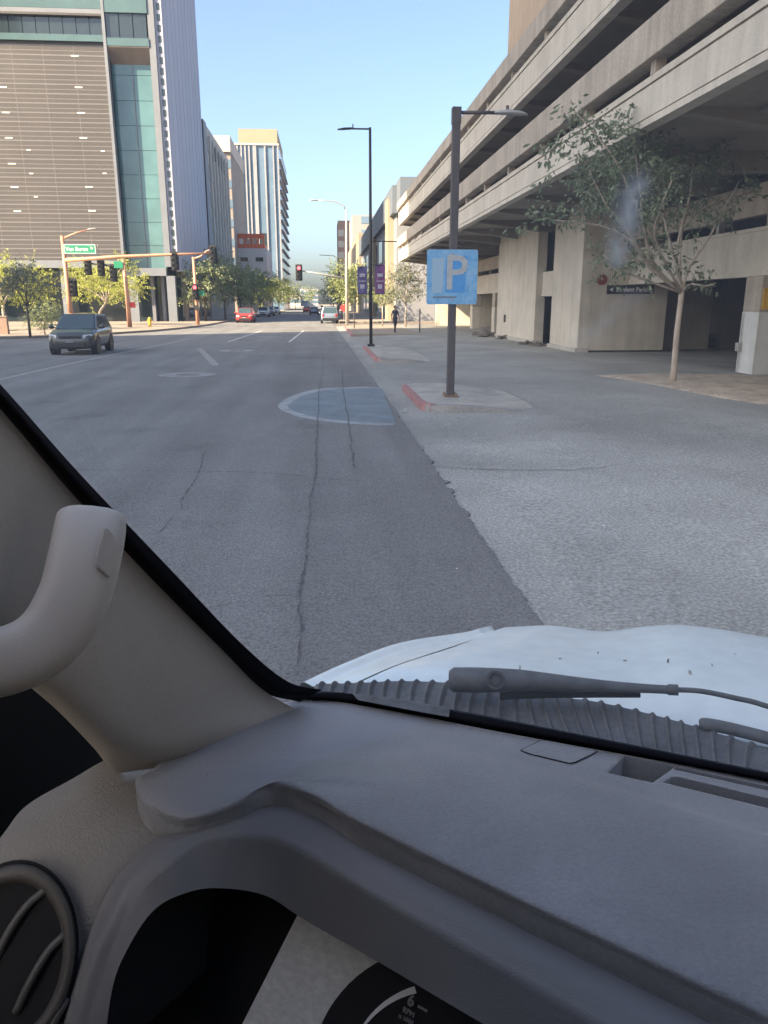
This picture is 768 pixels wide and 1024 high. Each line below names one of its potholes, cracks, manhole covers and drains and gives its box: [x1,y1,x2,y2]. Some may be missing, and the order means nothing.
crack [76,355,363,676]
